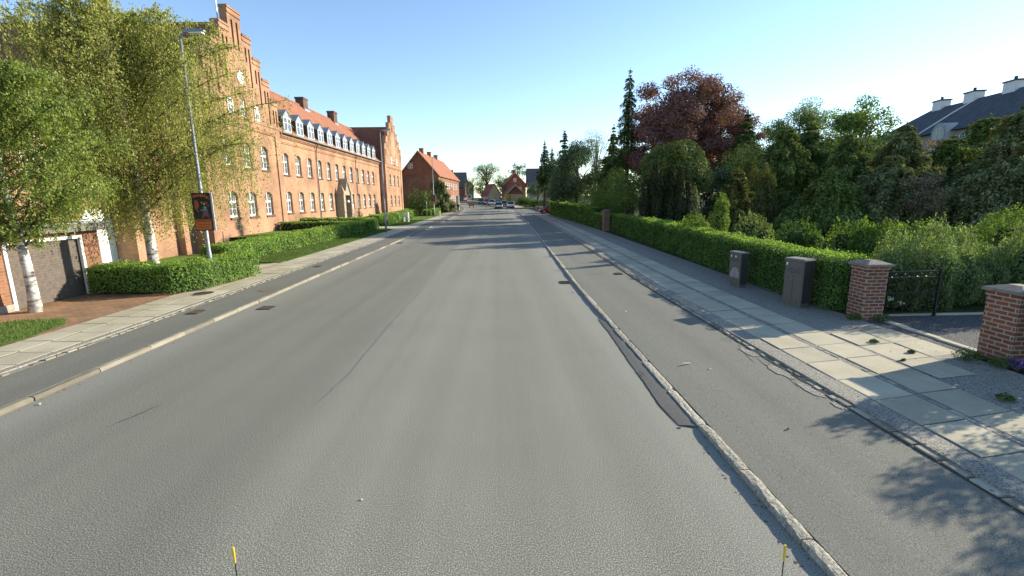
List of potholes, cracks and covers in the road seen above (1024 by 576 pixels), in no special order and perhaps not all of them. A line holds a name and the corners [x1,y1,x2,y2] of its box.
crack [321,282,429,399]
